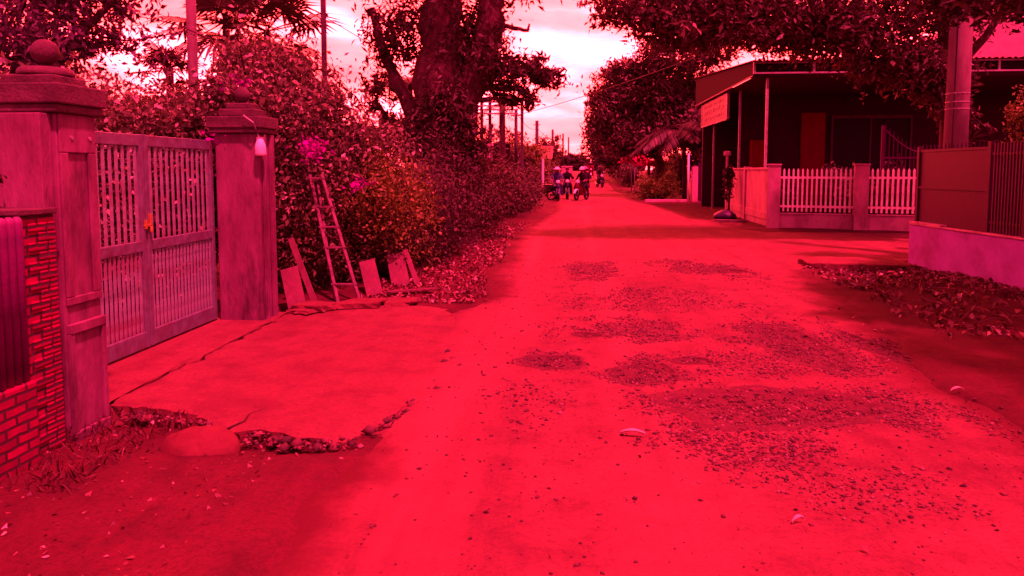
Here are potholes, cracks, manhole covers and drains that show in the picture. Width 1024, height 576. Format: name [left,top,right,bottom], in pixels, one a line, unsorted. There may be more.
pothole [514,354,586,370]
pothole [748,323,867,375]
pothole [647,385,904,432]
pothole [601,360,684,387]
